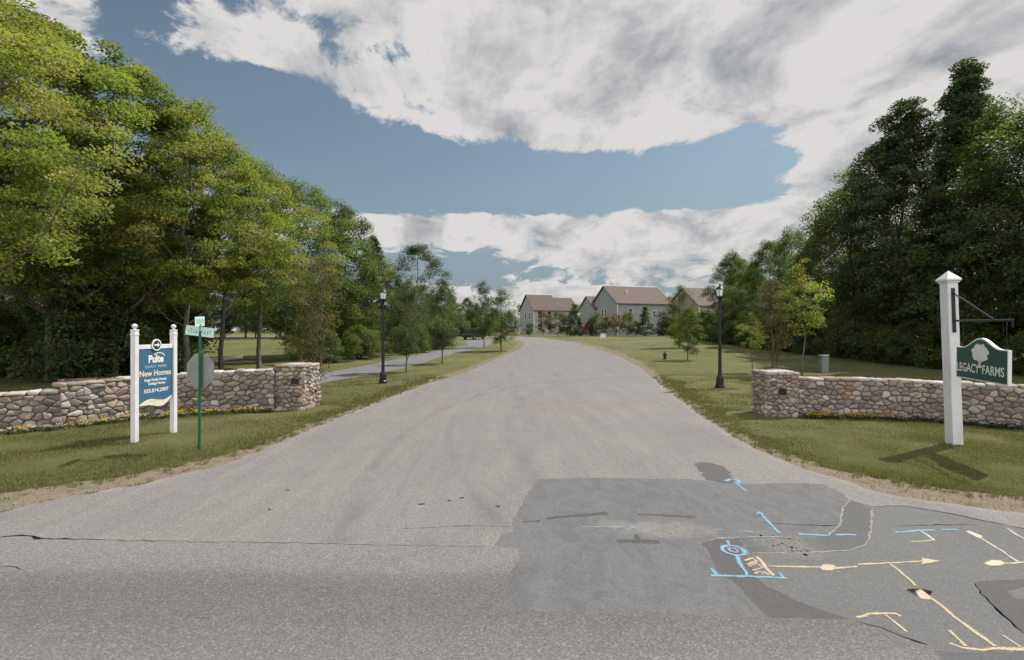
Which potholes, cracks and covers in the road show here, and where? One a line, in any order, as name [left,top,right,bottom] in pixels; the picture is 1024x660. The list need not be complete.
crack [1,535,481,547]
